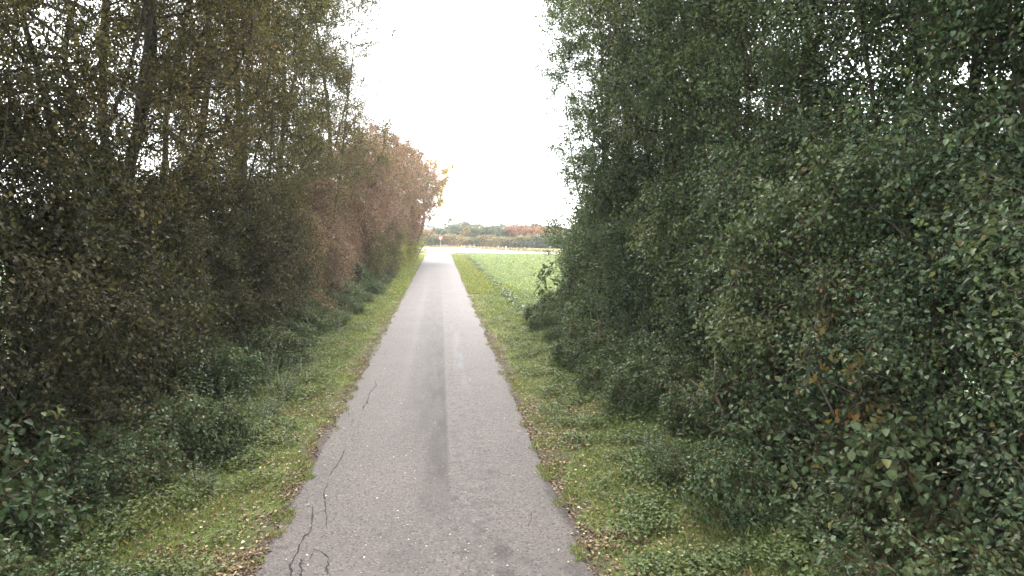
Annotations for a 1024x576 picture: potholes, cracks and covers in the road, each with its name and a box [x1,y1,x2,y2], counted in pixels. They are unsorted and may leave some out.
crack [285,382,377,576]
